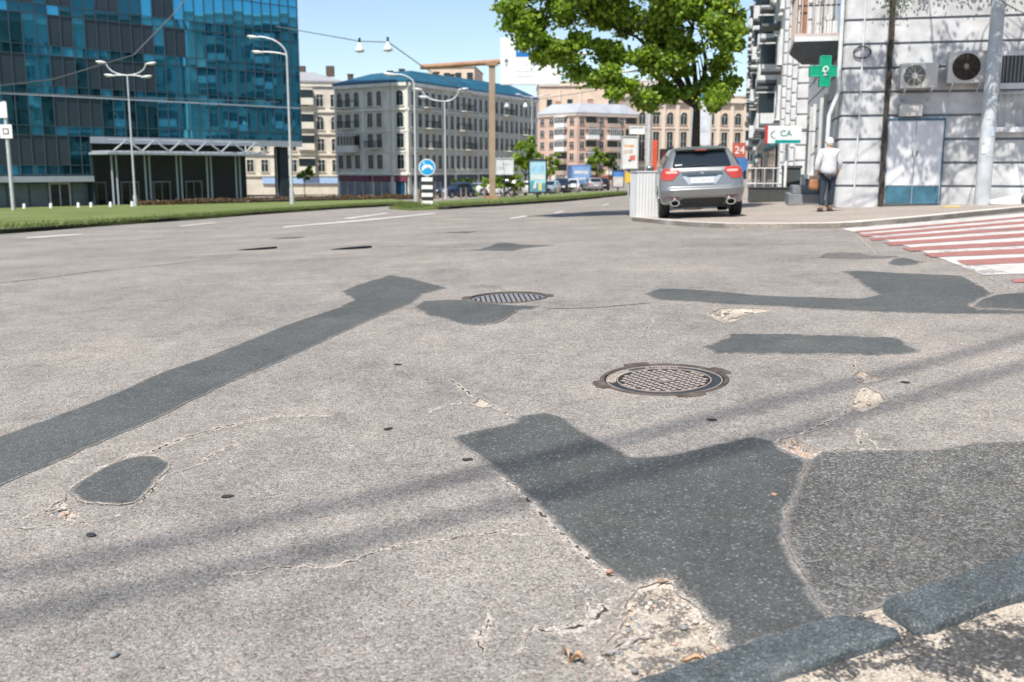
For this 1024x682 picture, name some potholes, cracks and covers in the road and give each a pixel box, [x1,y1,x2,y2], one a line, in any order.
pothole [774,435,823,459]
crack [202,516,550,577]
pothole [699,307,775,323]
crack [426,376,515,418]
pothole [587,574,735,682]
pothole [848,383,891,413]
crack [468,595,655,676]
crack [1,413,338,535]
manhole cover [592,362,731,398]
